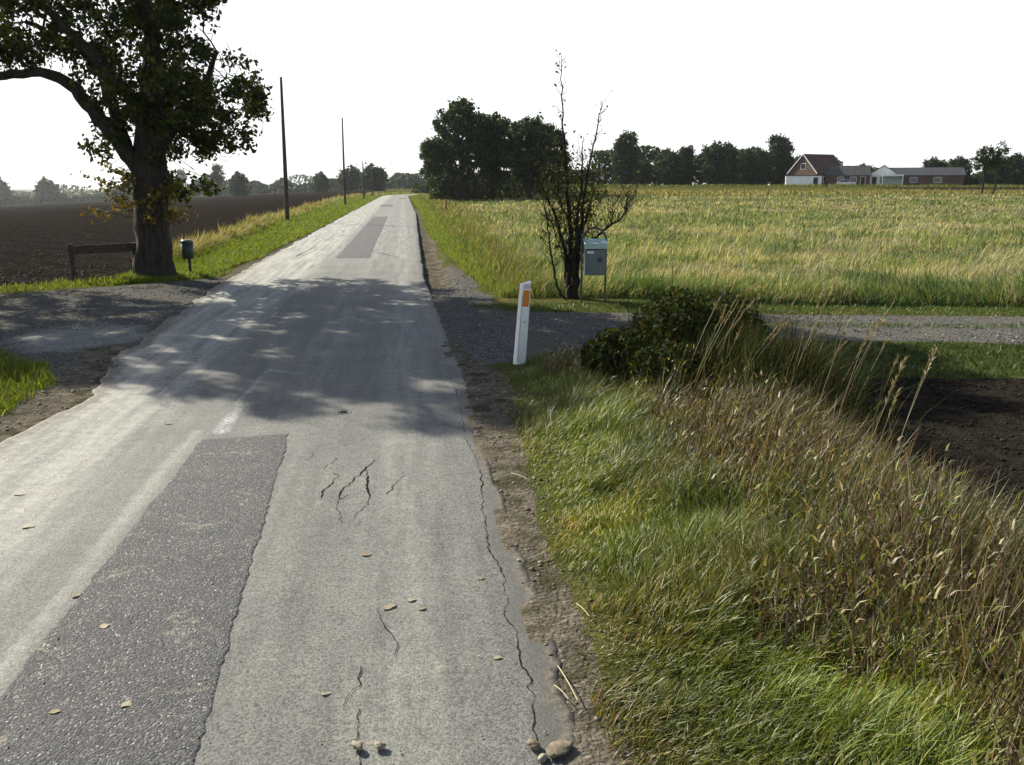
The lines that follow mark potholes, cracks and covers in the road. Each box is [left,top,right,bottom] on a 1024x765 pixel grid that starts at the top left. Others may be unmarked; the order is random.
crack [342,666,362,765]
crack [295,460,405,525]
crack [450,376,538,741]
